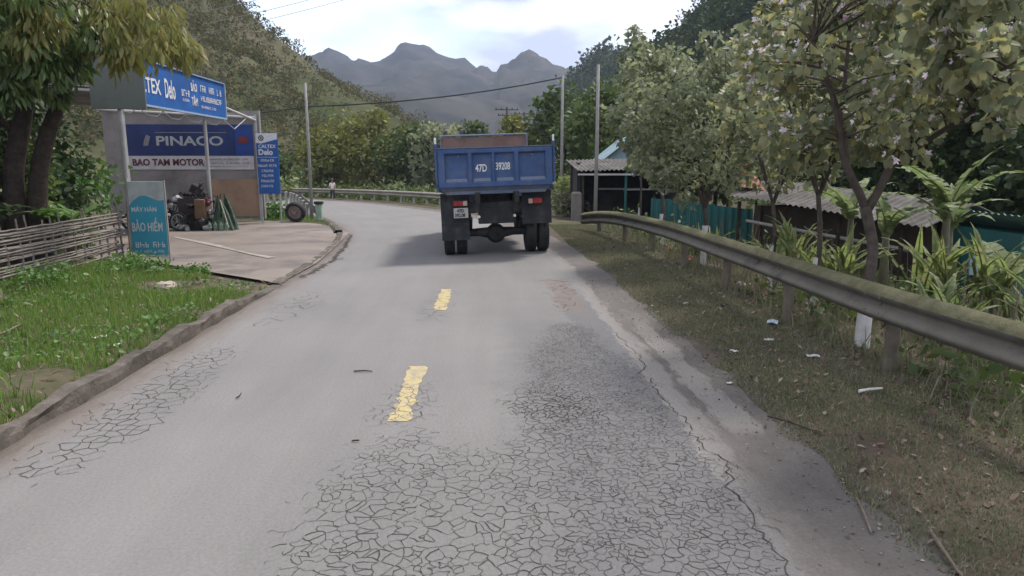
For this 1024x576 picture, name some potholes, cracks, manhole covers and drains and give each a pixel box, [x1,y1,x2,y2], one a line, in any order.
crack [247,234,353,328]
crack [269,320,800,576]
crack [0,348,236,486]
